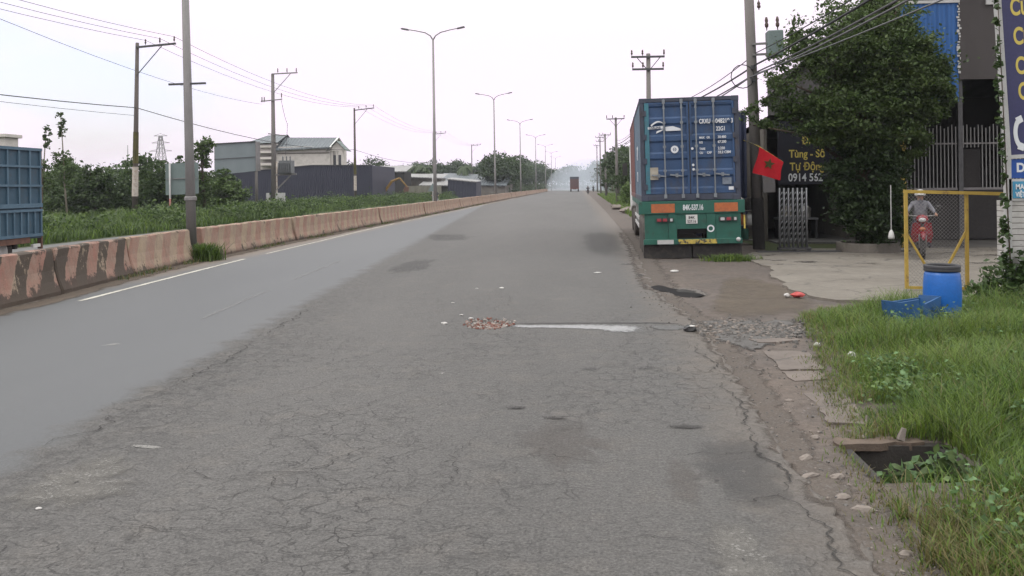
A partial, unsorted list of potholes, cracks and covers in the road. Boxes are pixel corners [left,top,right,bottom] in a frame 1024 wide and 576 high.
crack [674,343,857,576]
crack [194,450,356,502]
crack [113,523,383,532]
drain grate [833,436,988,484]
pothole [643,282,708,298]
